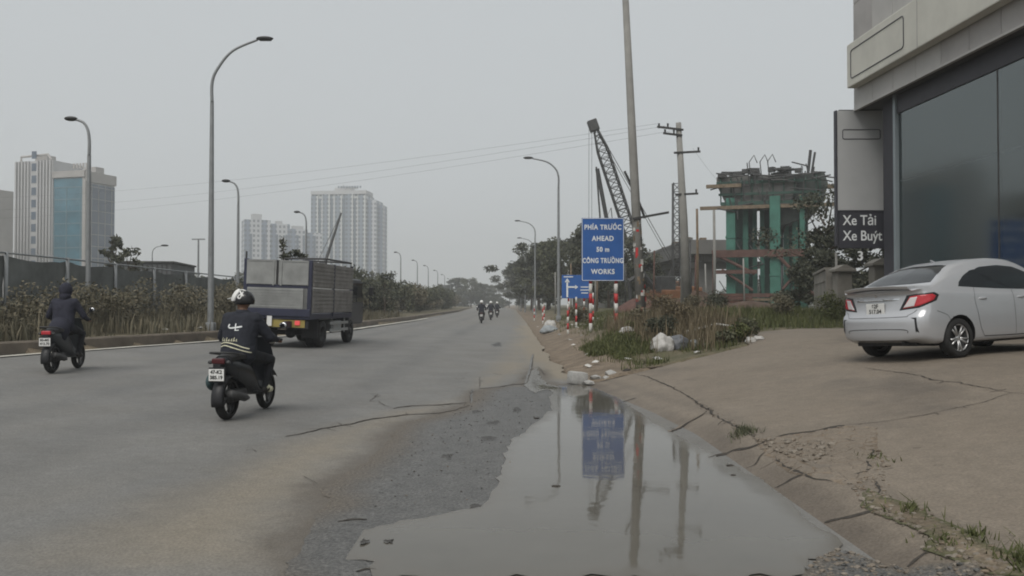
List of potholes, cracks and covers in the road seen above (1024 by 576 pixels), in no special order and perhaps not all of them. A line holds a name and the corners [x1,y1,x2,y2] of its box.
crack [597,374,759,441]
crack [749,425,891,502]
pothole [285,384,577,576]
crack [288,349,561,436]
